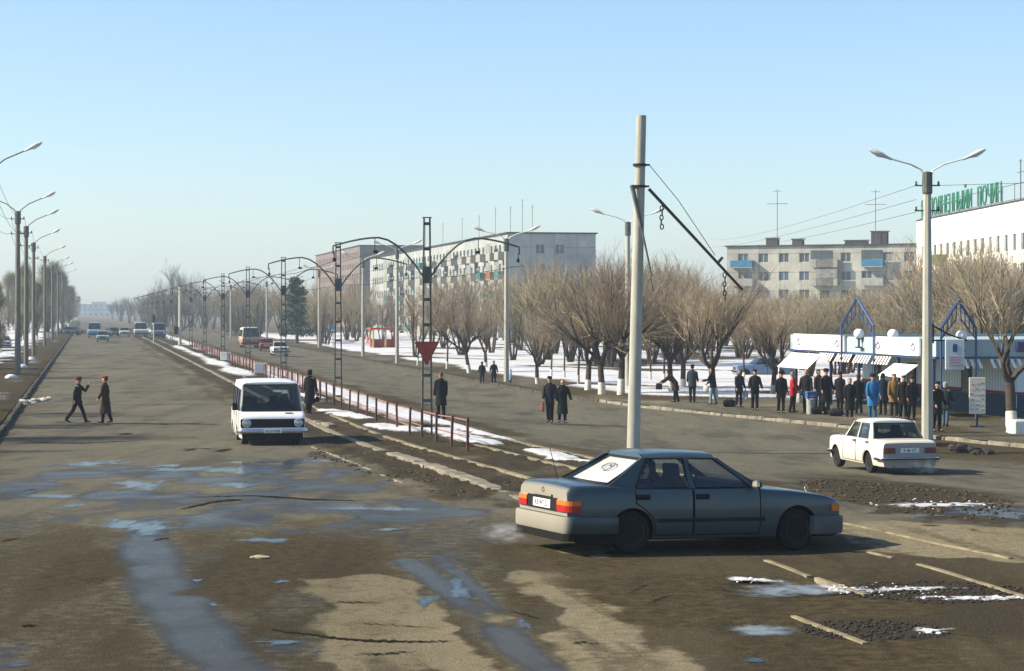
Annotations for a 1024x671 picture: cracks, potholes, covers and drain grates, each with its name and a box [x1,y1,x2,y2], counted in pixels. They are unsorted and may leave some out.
crack [182,495,362,509]
crack [271,622,453,655]
